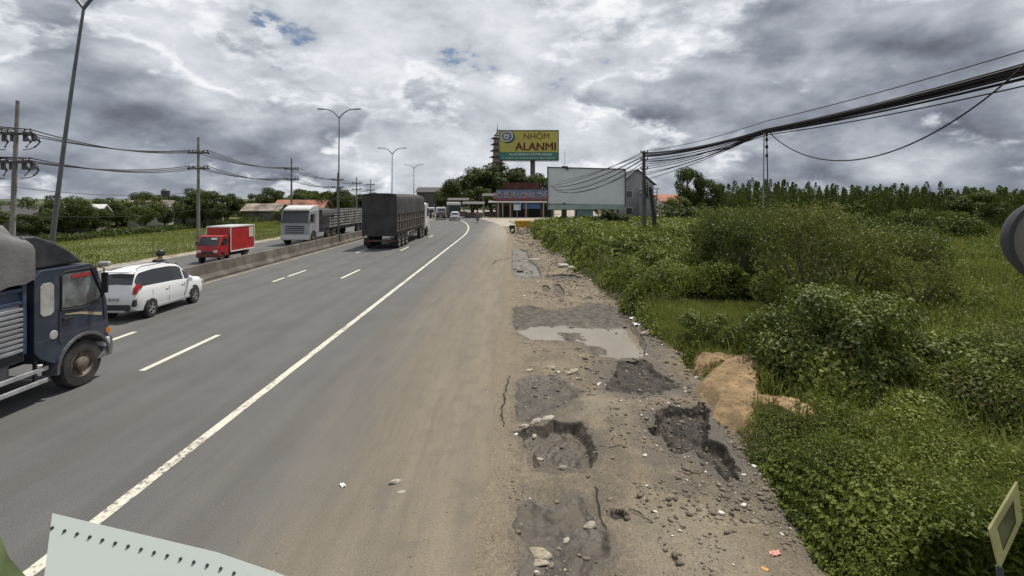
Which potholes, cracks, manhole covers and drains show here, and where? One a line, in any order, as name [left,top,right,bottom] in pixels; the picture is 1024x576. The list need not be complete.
crack [593,486,610,538]
pothole [506,418,604,475]
crack [498,375,511,426]
pothole [505,488,620,576]
pothole [553,283,566,296]
pothole [642,400,750,488]
pothole [509,302,651,362]
